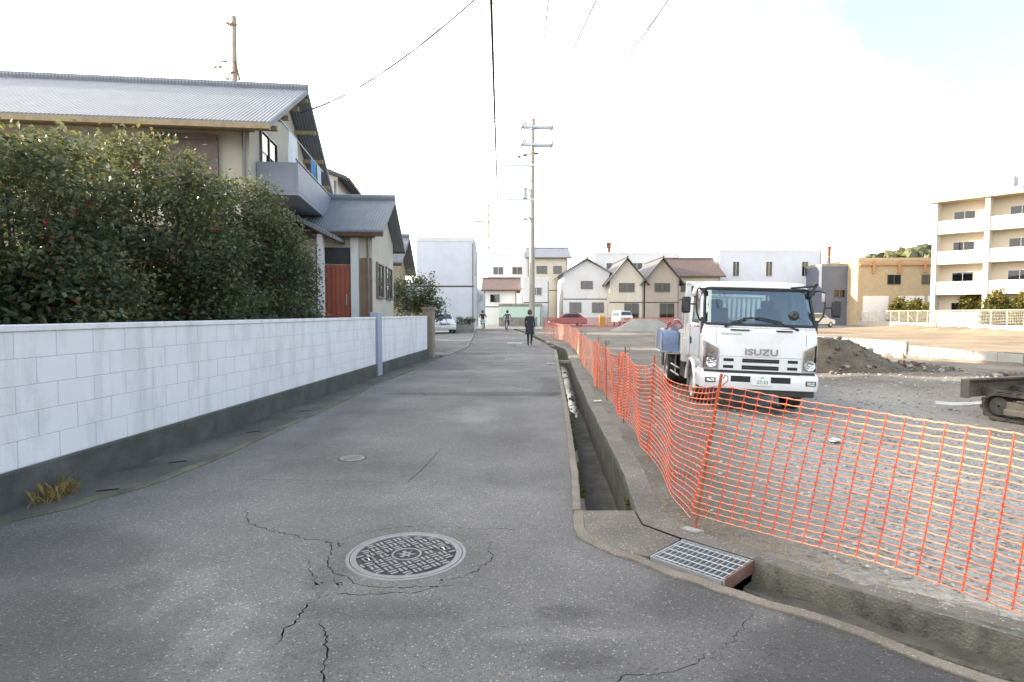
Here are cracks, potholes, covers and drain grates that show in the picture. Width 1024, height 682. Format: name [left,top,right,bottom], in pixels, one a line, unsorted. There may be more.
drain grate [650,539,754,588]
crack [243,509,517,682]
crack [617,608,761,682]
manhole cover [345,532,467,588]
